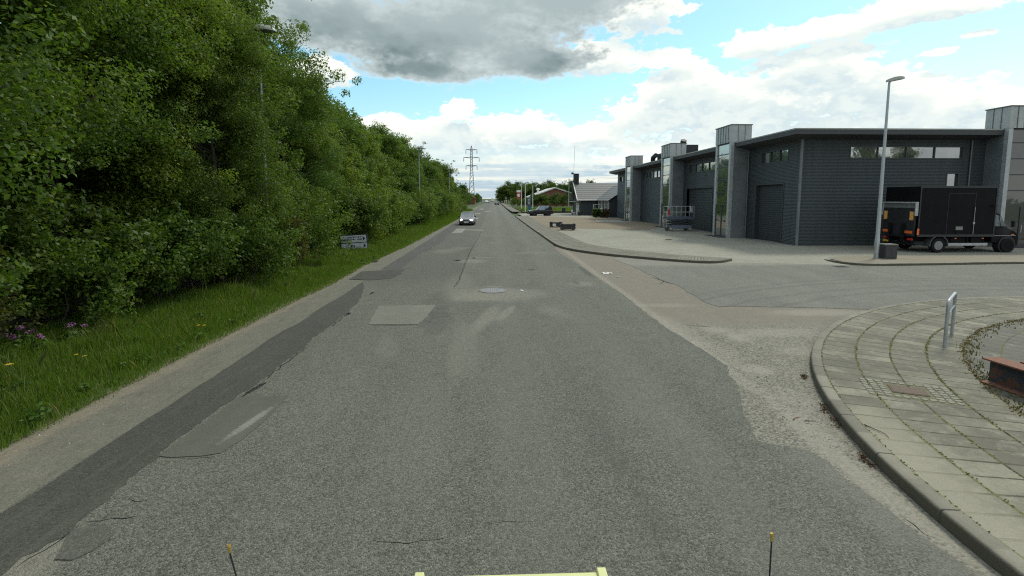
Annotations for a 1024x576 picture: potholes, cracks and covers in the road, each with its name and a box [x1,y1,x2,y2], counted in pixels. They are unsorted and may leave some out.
manhole cover [859,377,965,406]
